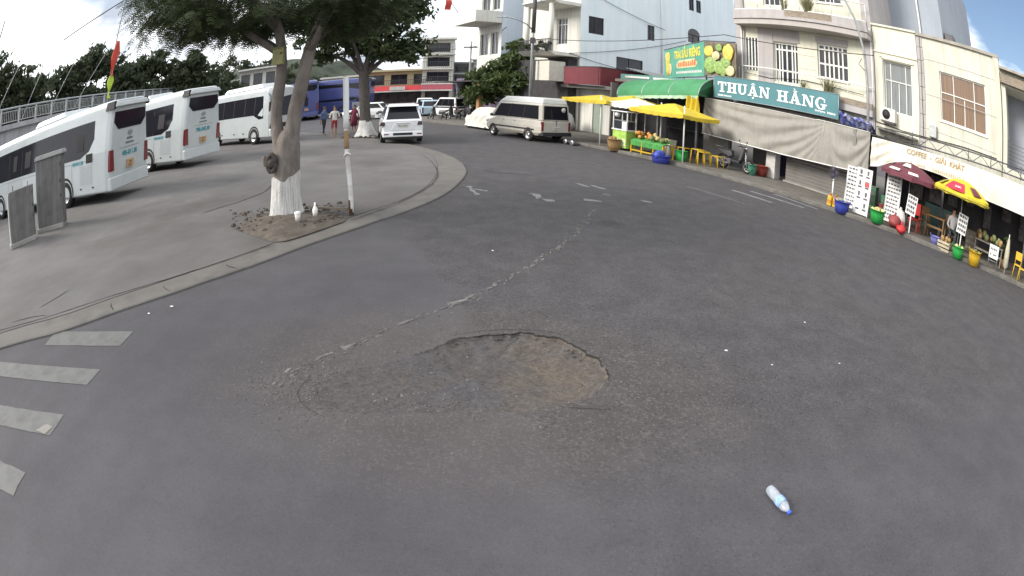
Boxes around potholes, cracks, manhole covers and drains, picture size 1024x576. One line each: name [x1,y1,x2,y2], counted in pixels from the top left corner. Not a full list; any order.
pothole [311,332,610,416]
